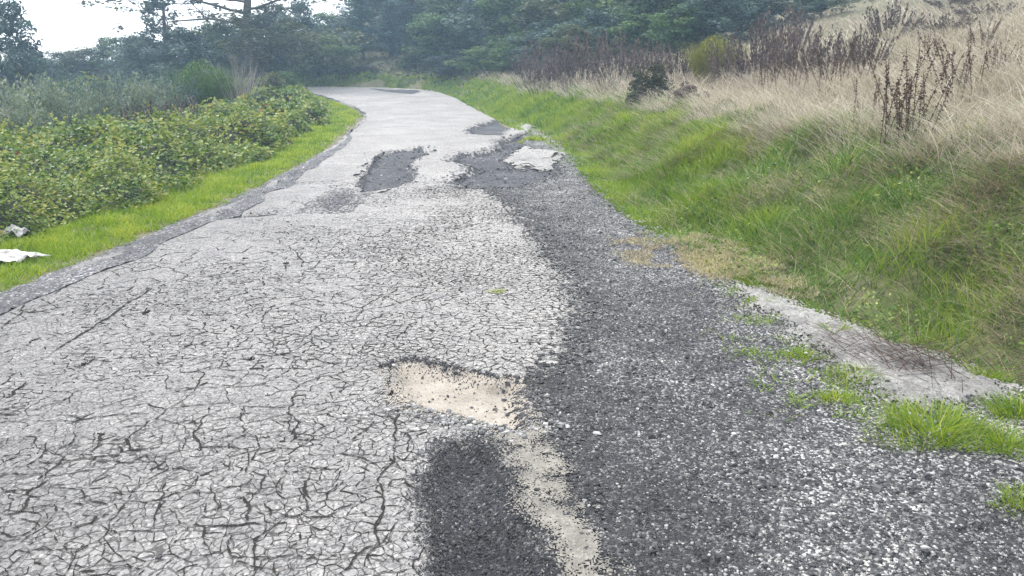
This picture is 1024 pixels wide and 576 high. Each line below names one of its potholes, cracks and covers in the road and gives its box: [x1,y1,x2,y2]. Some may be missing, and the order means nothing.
pothole [375,357,547,440]
crack [0,180,579,576]
